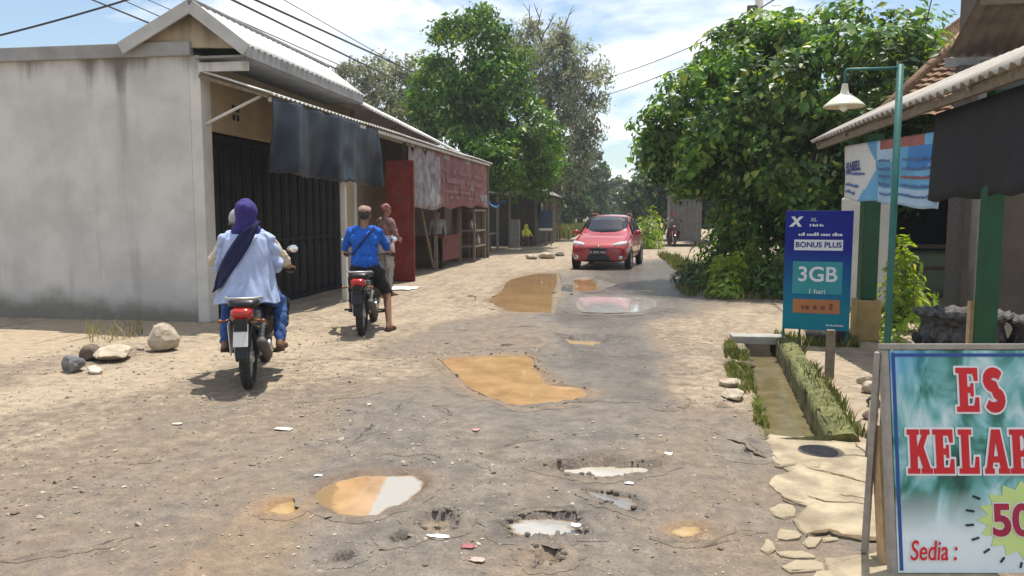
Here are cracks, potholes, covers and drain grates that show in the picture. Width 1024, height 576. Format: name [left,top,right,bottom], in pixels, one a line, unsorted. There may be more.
pothole [474,271,572,315]
pothole [293,466,445,524]
pothole [396,503,478,541]
pothole [248,492,319,521]
pothole [521,450,683,484]
pothole [432,351,605,412]
crack [714,432,768,459]
pothole [573,484,661,520]
pothole [648,515,723,542]
pothole [509,534,587,575]
pothole [553,294,678,316]
